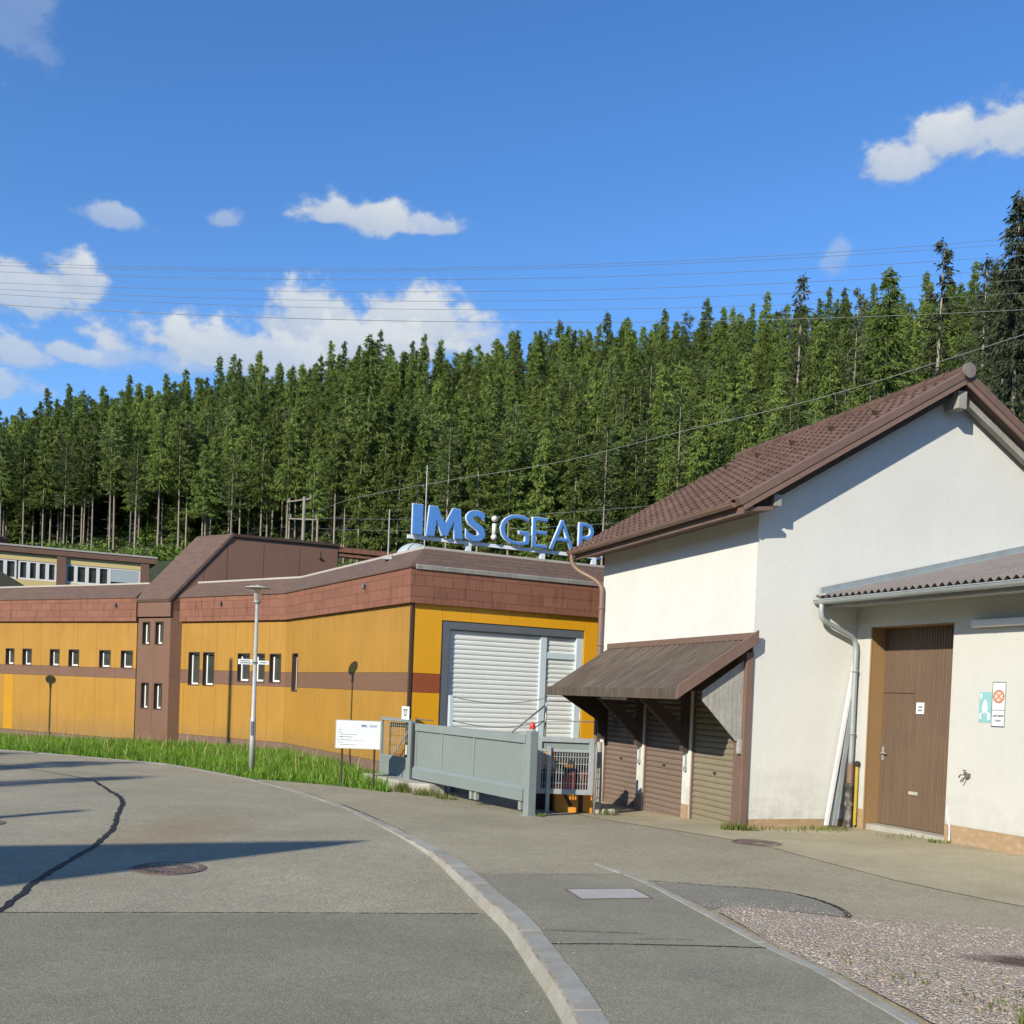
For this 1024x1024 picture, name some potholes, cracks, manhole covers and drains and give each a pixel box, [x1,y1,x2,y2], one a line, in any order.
utility cover [564,888,654,900]
manhole cover [130,862,207,876]
manhole cover [732,839,783,847]
